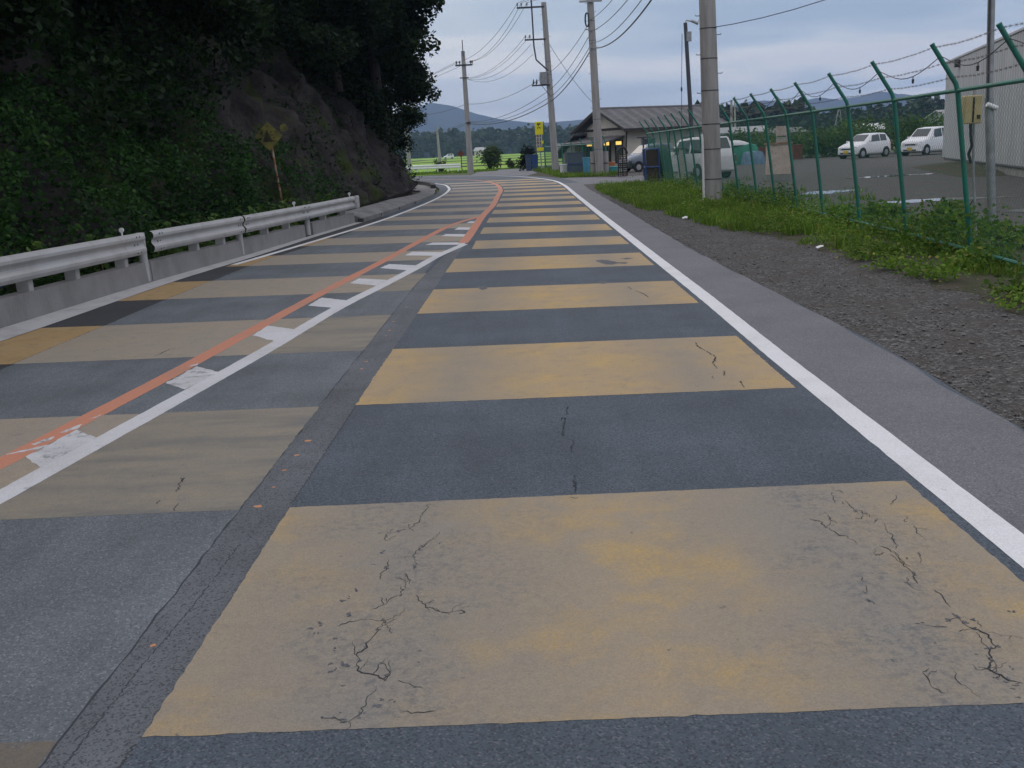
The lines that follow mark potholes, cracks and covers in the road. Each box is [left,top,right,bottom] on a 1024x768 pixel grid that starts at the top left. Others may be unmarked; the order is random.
crack [307,505,465,733]
crack [561,406,592,498]
crack [815,486,1022,698]
